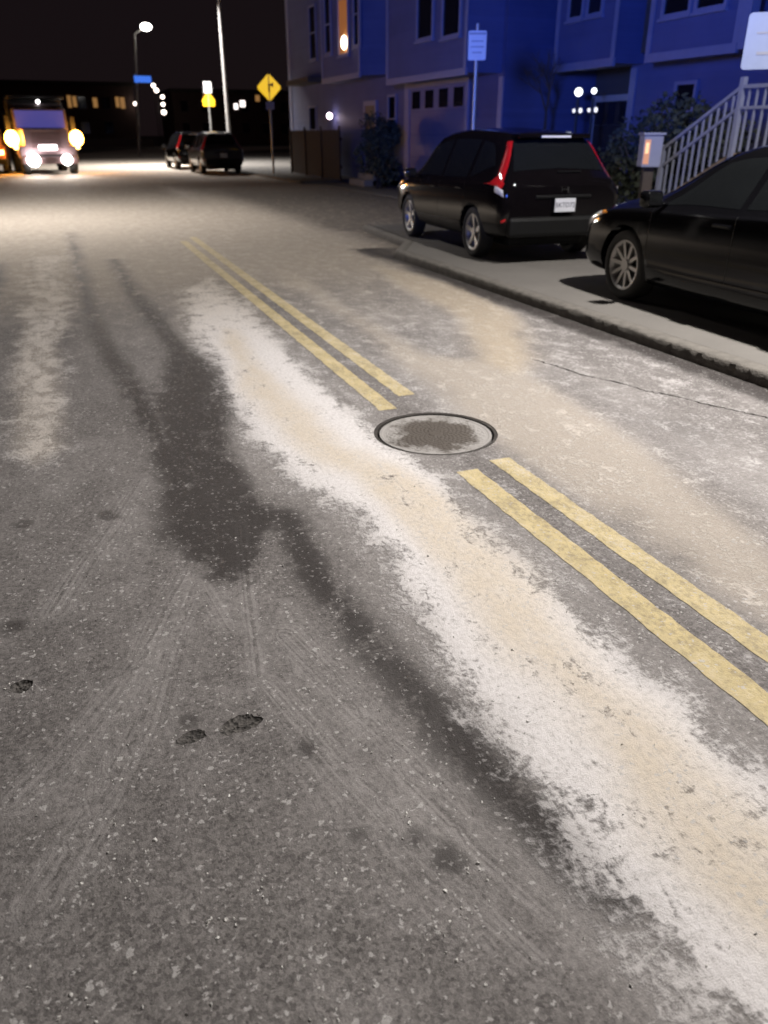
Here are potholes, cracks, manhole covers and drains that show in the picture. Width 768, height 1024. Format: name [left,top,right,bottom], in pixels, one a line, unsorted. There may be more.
crack [533,359,768,418]
pothole [10,680,33,694]
pothole [219,714,264,736]
manhole cover [374,413,498,455]
pothole [175,729,207,745]
